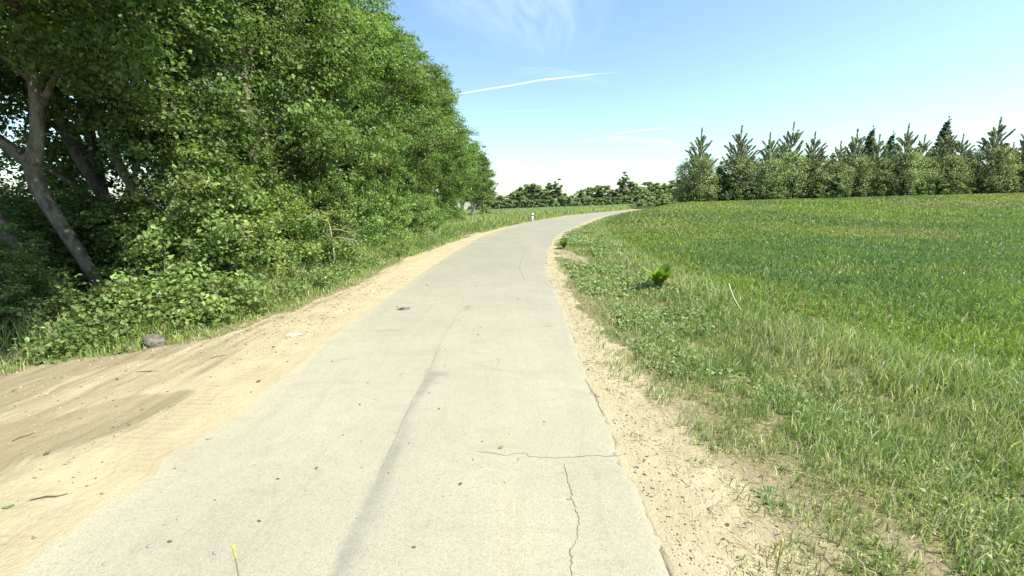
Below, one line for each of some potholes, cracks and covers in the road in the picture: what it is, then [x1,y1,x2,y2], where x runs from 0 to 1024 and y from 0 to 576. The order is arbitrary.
crack [479,451,620,573]
